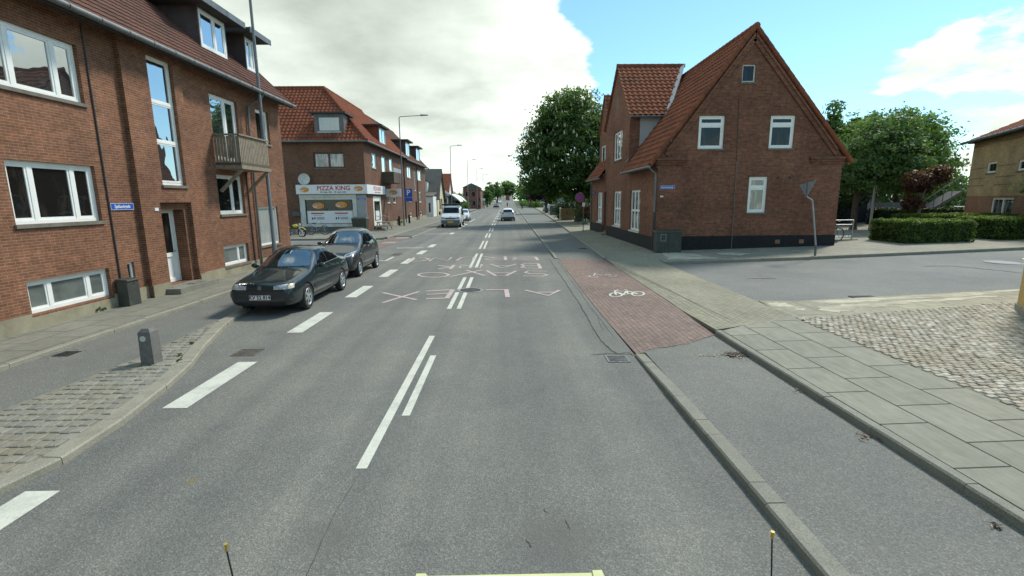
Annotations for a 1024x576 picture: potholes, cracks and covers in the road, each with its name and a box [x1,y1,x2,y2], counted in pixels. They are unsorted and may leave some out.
drain grate [604,355,631,363]
